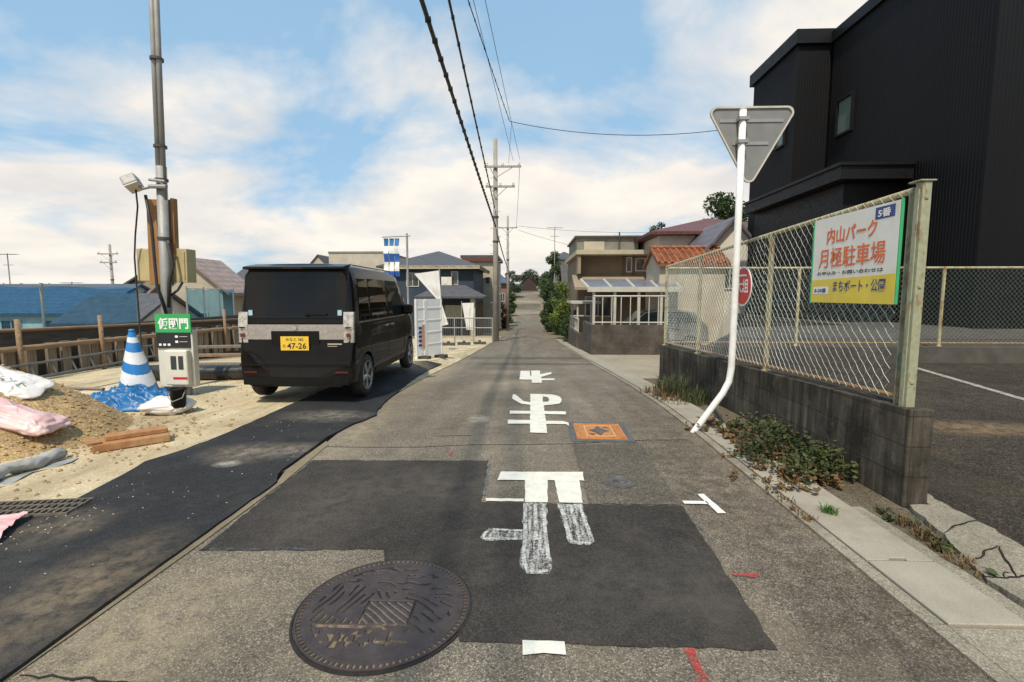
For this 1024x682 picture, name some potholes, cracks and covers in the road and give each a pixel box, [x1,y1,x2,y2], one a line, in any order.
crack [944,520,1024,579]
manhole cover [603,475,635,489]
manhole cover [568,422,636,443]
manhole cover [289,559,472,677]
drain grate [0,497,94,517]
